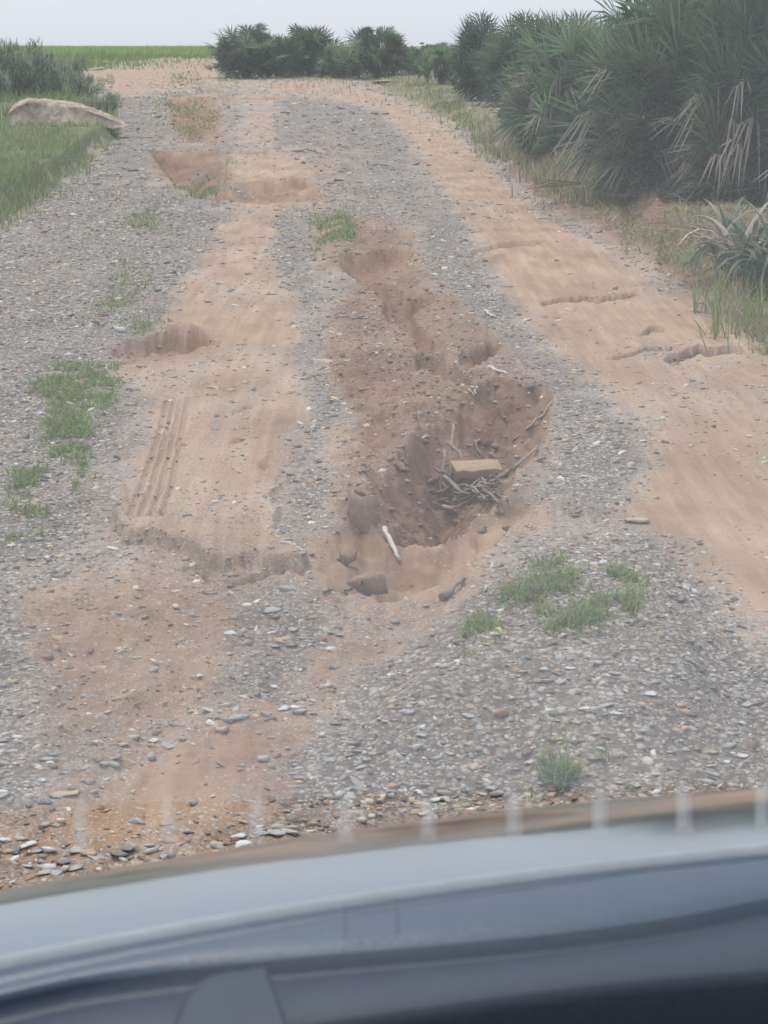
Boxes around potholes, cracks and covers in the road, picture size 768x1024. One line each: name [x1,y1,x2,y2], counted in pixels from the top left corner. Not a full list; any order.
crack [608,347,673,360]
pothole [110,325,224,359]
pothole [148,147,232,202]
pothole [308,376,557,606]
pothole [227,179,320,205]
crack [542,293,637,307]
